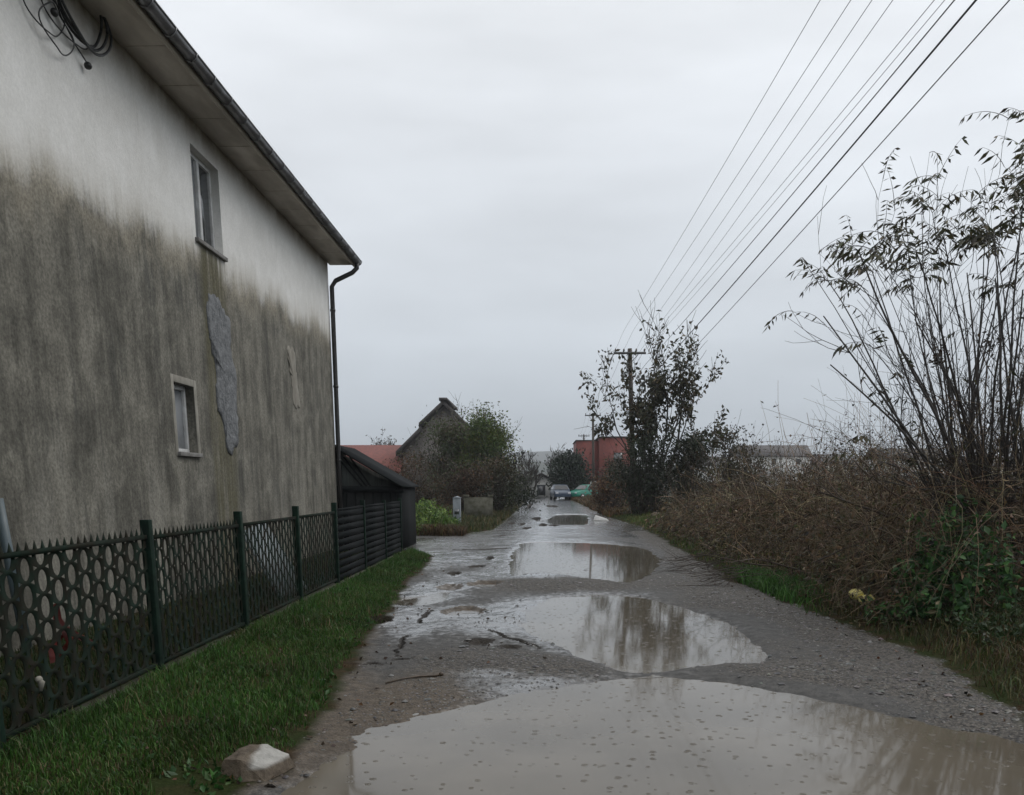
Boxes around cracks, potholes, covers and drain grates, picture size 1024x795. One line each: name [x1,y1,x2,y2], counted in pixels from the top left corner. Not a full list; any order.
pothole [504,541,667,583]
pothole [534,514,592,525]
pothole [439,605,490,616]
pothole [383,591,455,606]
pothole [512,593,781,679]
pothole [261,673,1024,795]
pothole [463,637,495,646]
